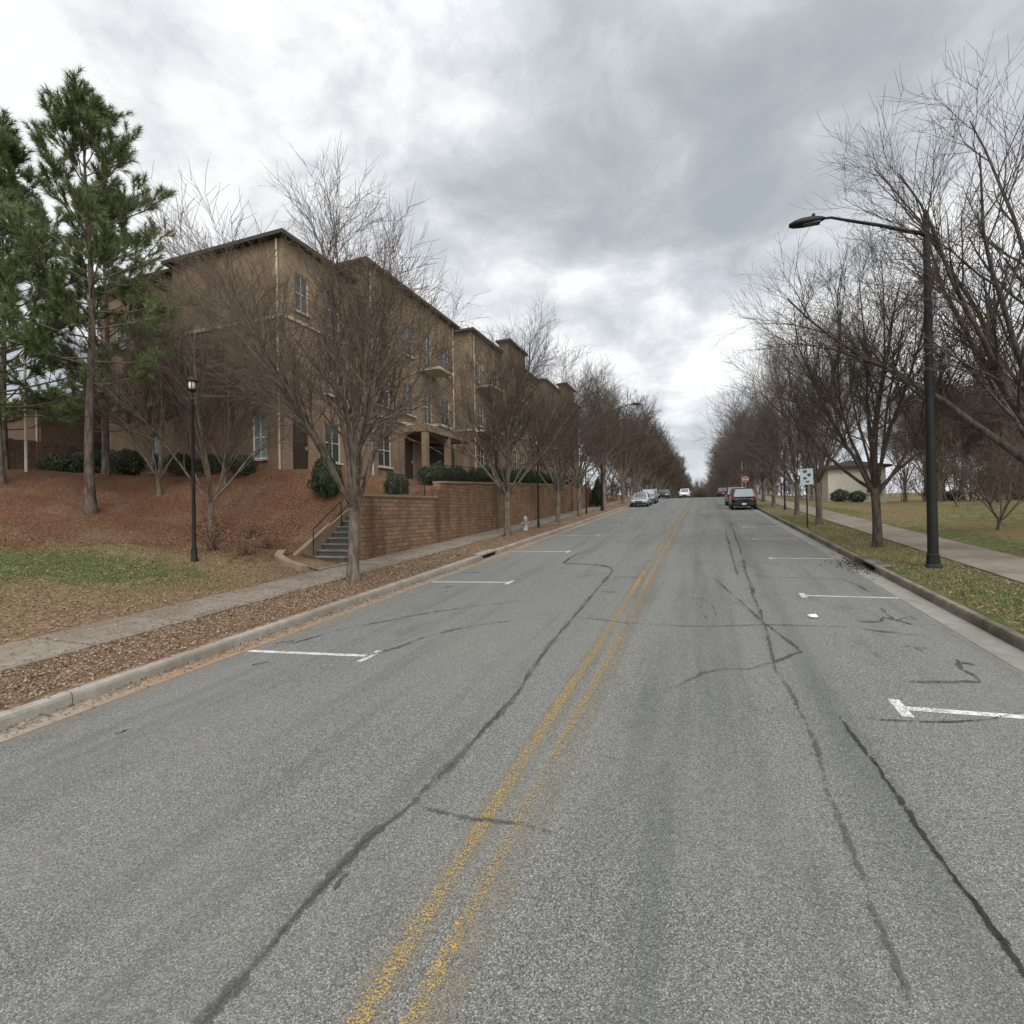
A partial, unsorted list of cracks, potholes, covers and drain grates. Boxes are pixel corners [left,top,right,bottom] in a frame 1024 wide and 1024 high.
crack [277,586,518,661]
crack [333,872,348,888]
crack [574,523,1024,1002]
drain grate [475,549,497,560]
